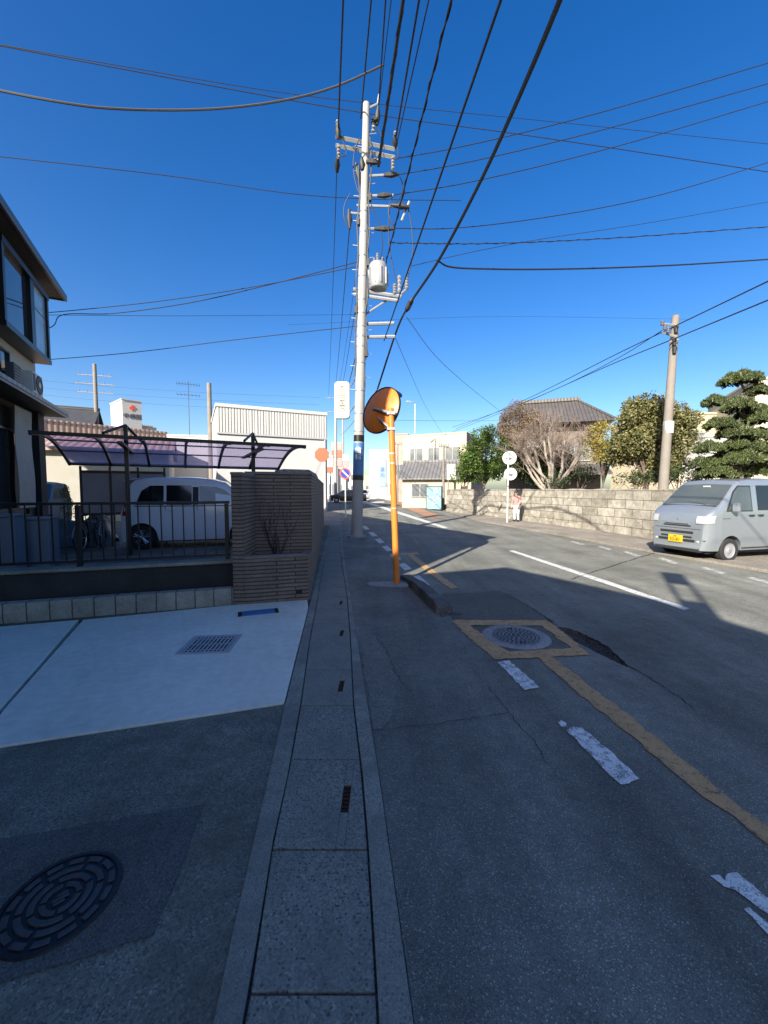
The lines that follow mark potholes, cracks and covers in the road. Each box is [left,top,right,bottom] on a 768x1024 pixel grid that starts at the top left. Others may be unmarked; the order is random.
crack [376,684,549,765]
manhole cover [482,625,552,650]
pothole [557,627,629,667]
drain grate [175,634,243,655]
manhole cover [0,851,123,962]
